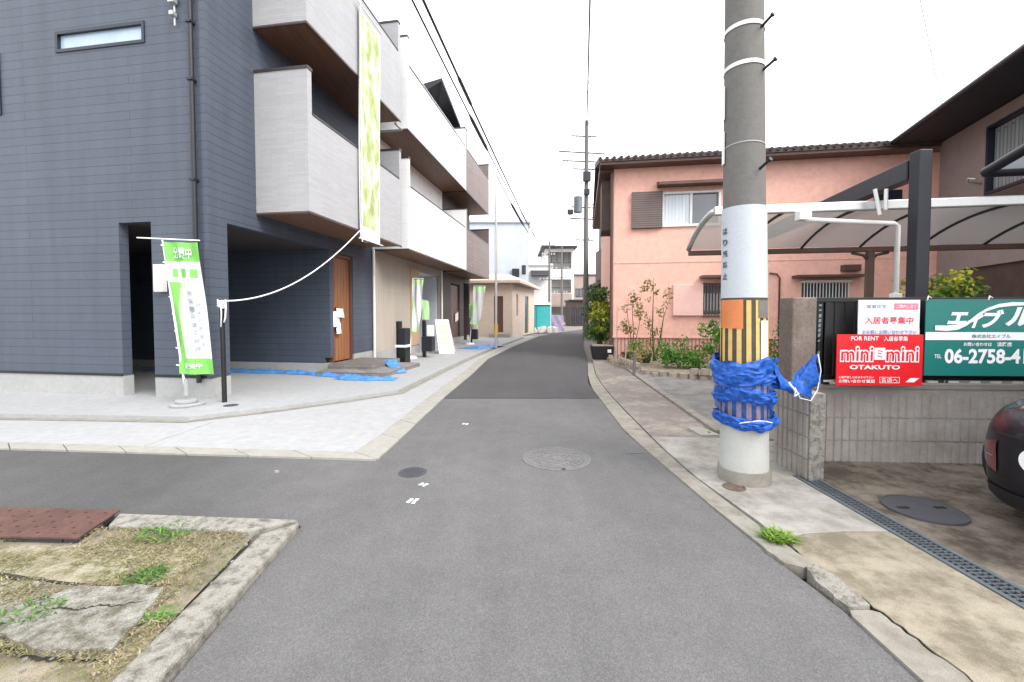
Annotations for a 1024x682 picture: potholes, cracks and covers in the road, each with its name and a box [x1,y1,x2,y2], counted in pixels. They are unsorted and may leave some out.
drain grate [793,475,1024,609]
utility cover [687,427,720,437]
manhole cover [880,494,971,526]
manhole cover [398,467,427,478]
manhole cover [523,447,591,471]
manhole cover [723,482,746,492]
crack [44,600,146,611]
